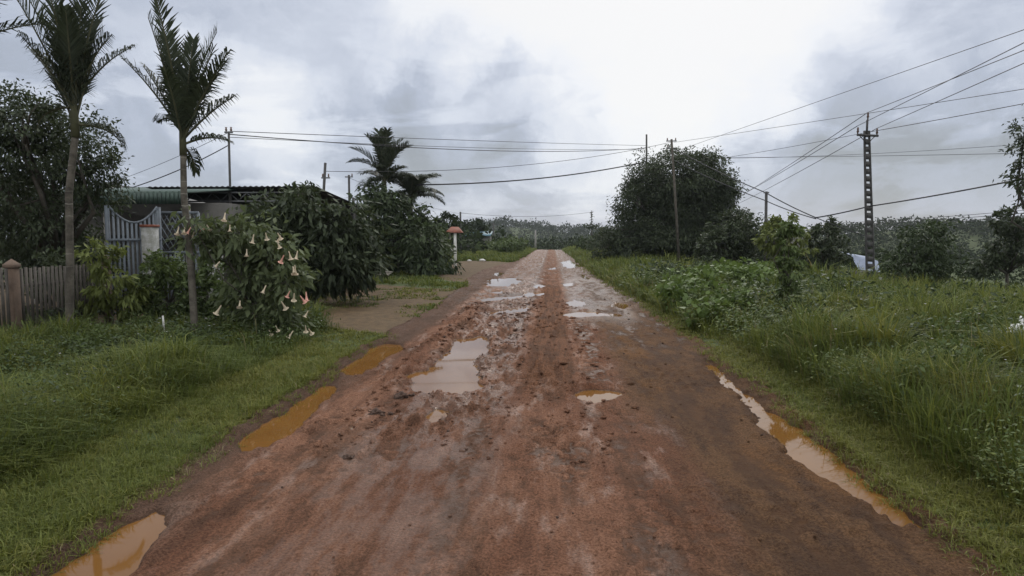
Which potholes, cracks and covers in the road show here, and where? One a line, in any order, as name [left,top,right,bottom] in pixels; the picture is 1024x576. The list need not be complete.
pothole [478,277,531,287]
pothole [568,380,630,403]
pothole [403,331,495,396]
